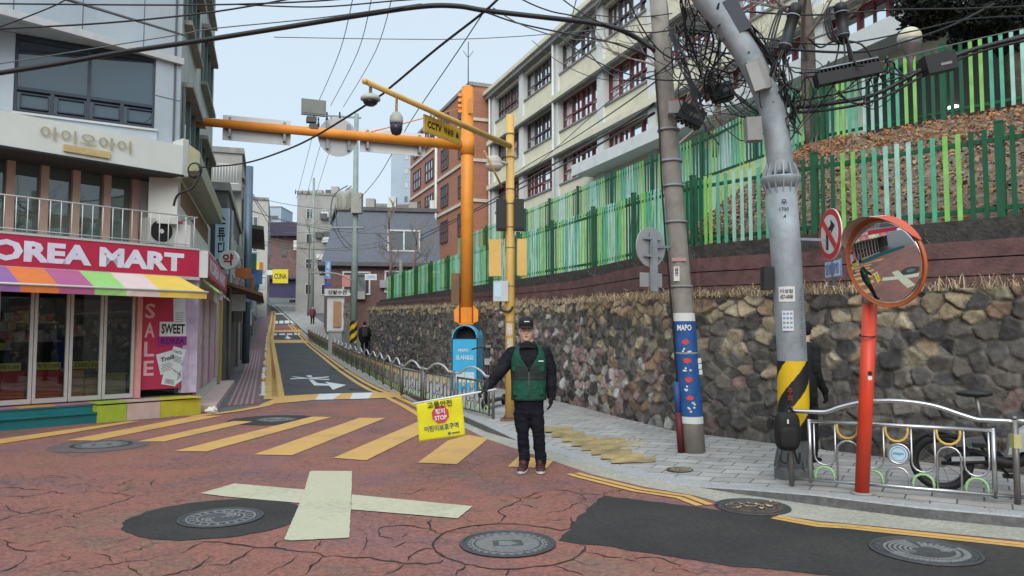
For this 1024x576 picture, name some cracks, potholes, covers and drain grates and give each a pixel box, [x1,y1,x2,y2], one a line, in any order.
manhole cover [176,507,264,528]
crack [0,475,709,576]
manhole cover [715,498,792,516]
manhole cover [459,530,556,557]
manhole cover [868,536,985,567]
manhole cover [69,440,133,449]
